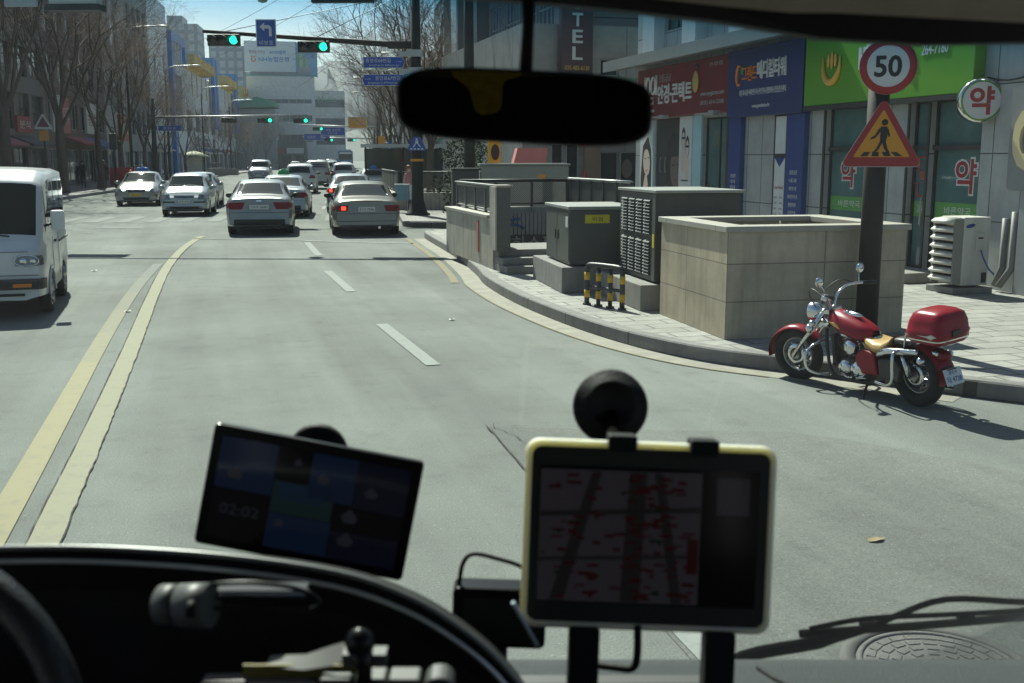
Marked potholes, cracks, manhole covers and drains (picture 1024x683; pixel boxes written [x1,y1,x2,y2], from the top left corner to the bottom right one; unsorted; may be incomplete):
manhole cover [840,628,977,659]
crack [486,423,643,469]
